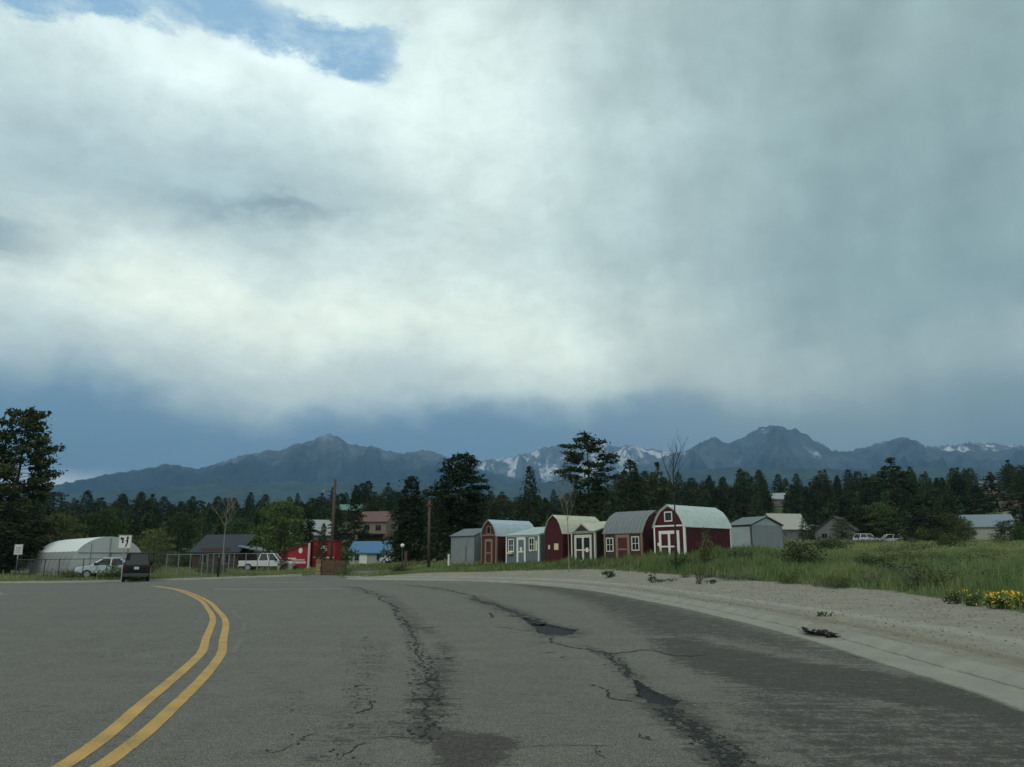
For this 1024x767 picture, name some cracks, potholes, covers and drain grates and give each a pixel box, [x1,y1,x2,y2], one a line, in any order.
pothole [522,617,578,636]
crack [402,584,757,767]
crack [327,585,455,767]
crack [254,690,322,754]
pothole [632,679,683,707]
